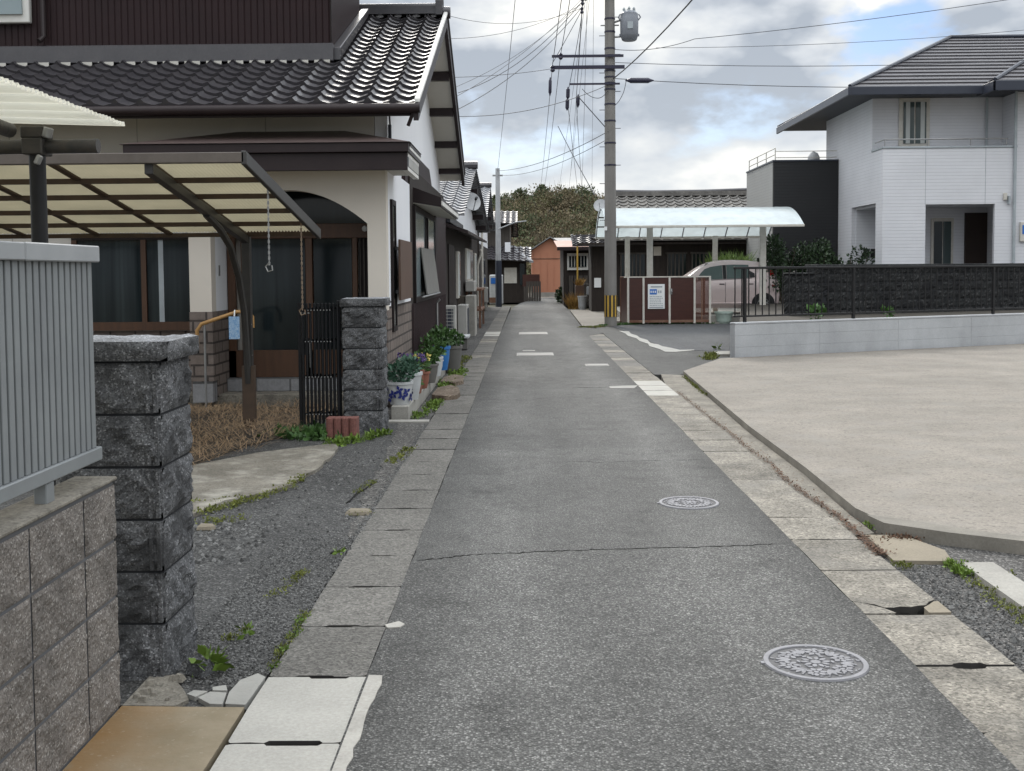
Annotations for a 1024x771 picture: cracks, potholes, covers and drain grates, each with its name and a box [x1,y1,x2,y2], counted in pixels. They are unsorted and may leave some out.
manhole cover [760,644,870,682]
manhole cover [657,496,719,510]
crack [419,544,771,561]
